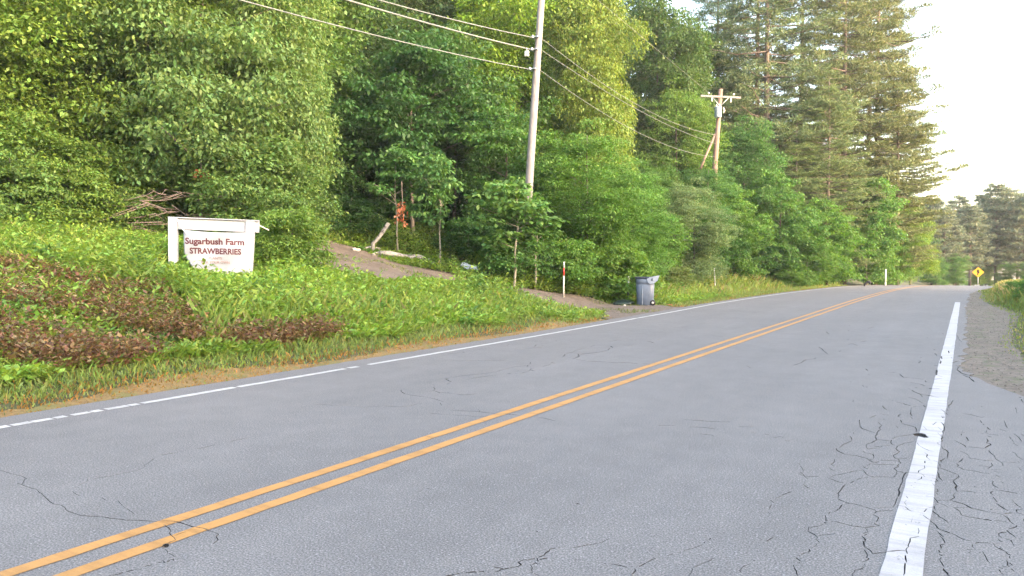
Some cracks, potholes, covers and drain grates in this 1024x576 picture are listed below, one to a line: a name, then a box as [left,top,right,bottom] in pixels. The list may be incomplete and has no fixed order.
crack [448,531,608,576]
crack [784,341,1024,576]
crack [1,439,240,563]
